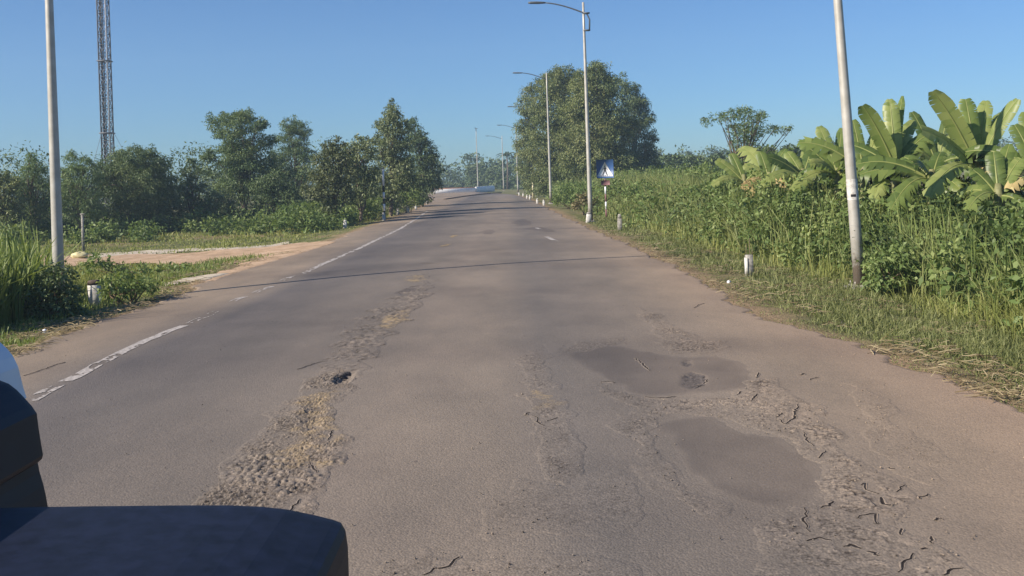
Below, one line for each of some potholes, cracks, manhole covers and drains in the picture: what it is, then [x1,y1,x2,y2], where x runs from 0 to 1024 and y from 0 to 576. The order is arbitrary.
crack [372,303,987,576]
pothole [681,372,706,389]
